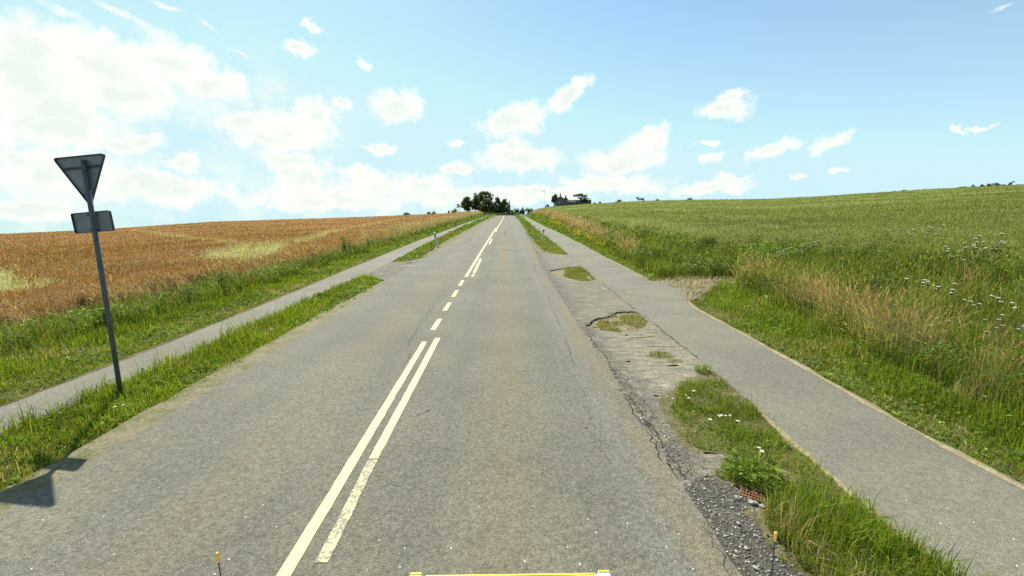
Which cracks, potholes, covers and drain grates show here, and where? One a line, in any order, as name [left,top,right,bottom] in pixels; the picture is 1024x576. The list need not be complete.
pothole [587,313,645,332]
crack [588,311,686,477]
pothole [551,268,595,281]
